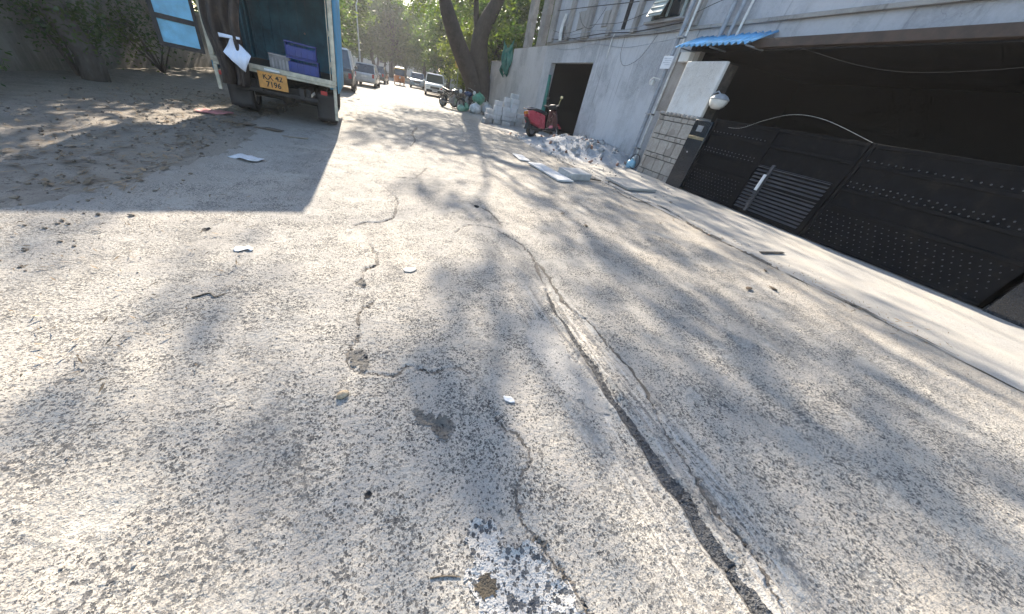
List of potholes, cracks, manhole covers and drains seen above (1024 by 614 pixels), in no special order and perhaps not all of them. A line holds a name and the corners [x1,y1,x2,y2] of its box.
crack [456,208,548,290]
crack [355,245,380,285]
pothole [348,349,370,373]
crack [345,302,595,614]
